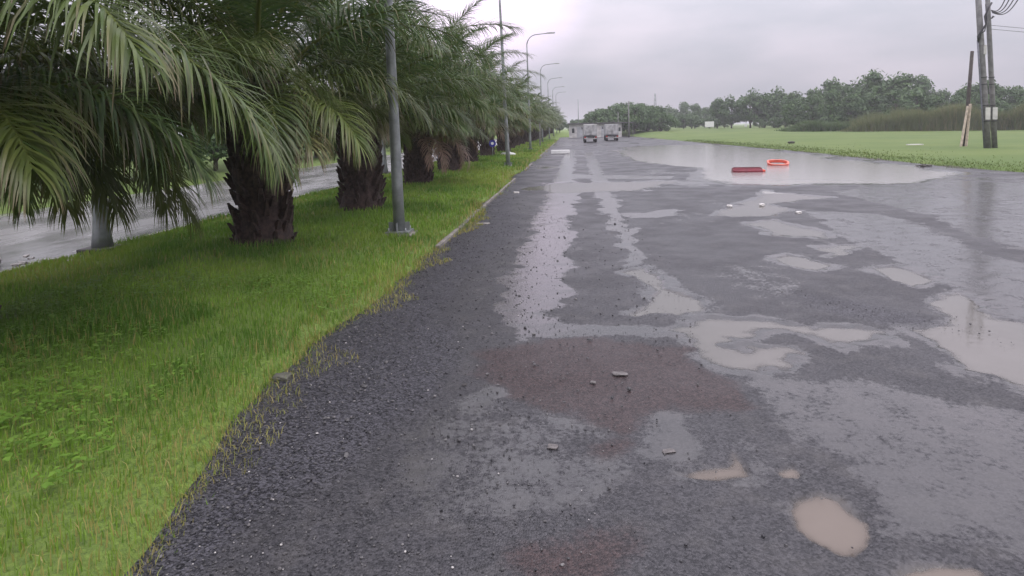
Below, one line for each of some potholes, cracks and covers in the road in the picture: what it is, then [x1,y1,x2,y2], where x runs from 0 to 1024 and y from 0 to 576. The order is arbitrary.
pothole [776,484,887,564]
pothole [659,445,763,486]
